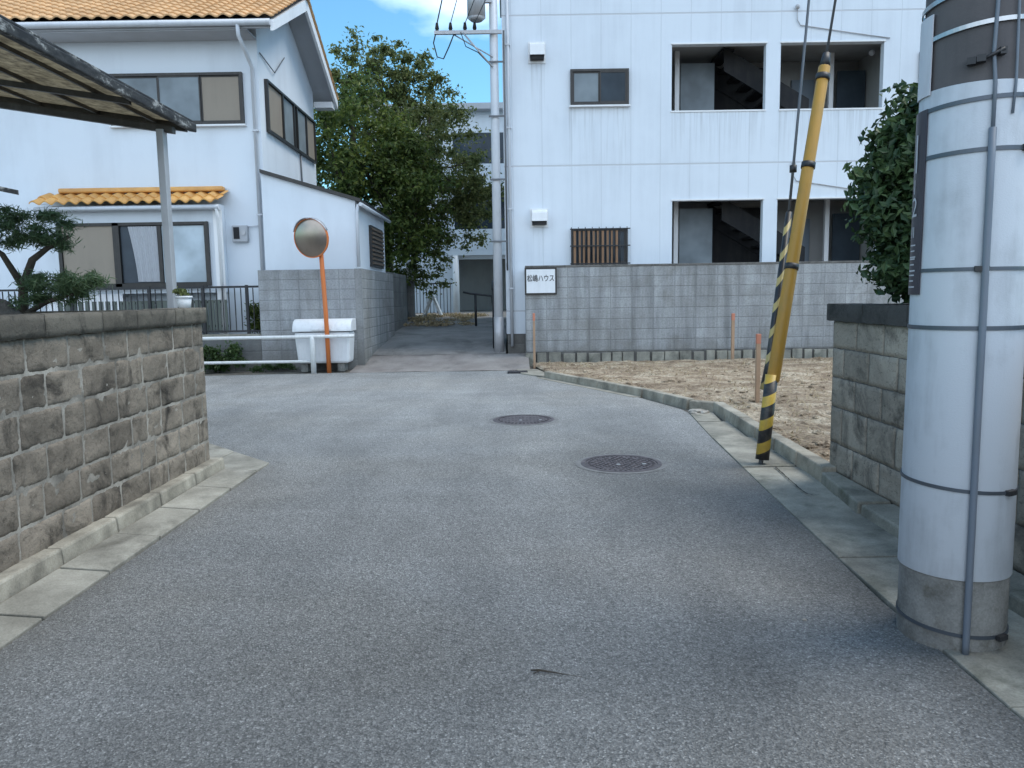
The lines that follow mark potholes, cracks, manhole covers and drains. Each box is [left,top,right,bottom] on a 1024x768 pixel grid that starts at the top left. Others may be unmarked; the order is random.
manhole cover [575,454,668,474]
manhole cover [489,414,558,425]
